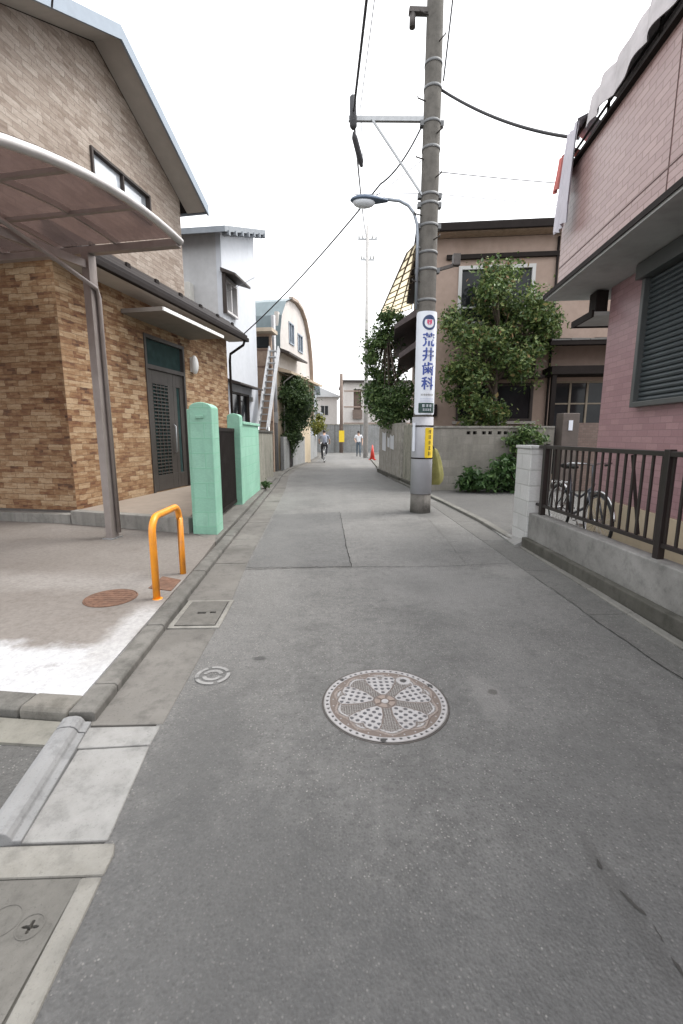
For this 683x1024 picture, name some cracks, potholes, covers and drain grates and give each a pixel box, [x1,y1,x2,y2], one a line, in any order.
manhole cover [322,669,450,745]
manhole cover [82,589,138,608]
manhole cover [195,666,231,686]
crack [597,859,683,976]
